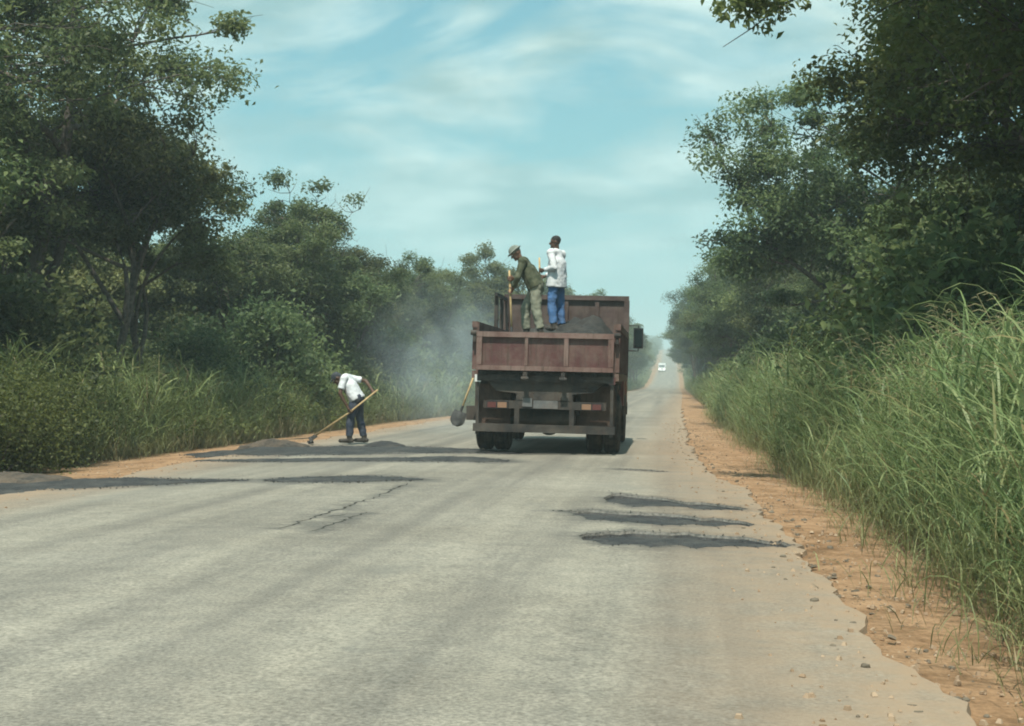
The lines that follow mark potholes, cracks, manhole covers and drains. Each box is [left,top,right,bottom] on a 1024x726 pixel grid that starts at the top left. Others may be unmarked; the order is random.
crack [282,483,408,531]
